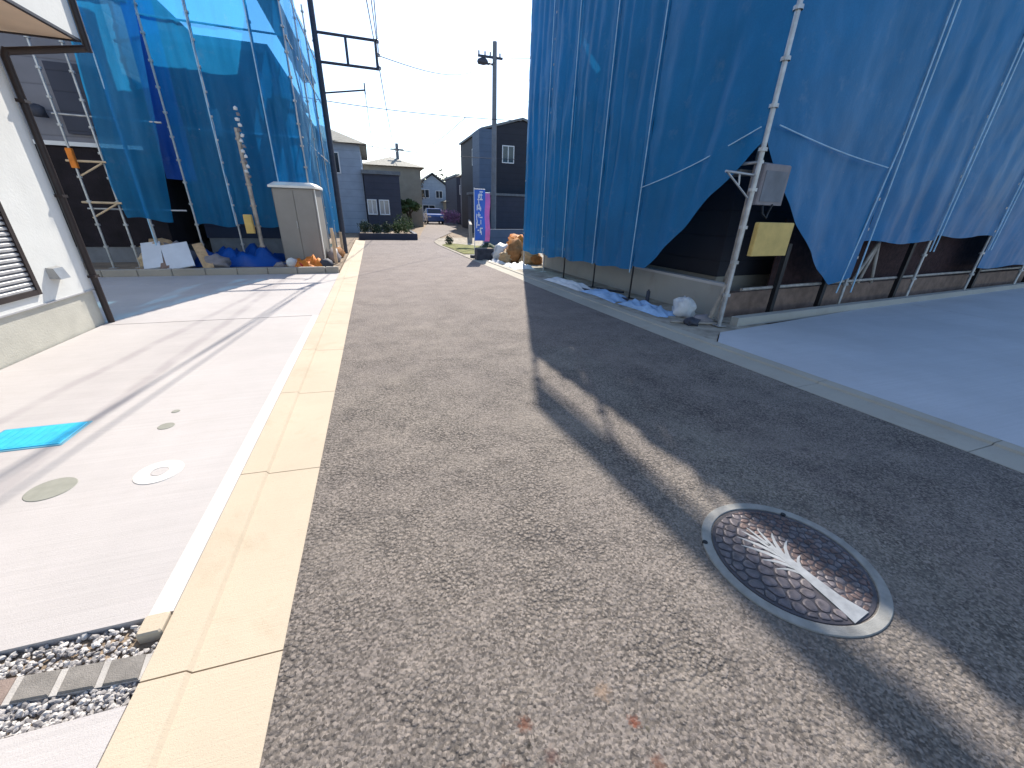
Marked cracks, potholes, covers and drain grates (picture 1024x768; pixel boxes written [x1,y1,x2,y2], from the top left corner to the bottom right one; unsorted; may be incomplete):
manhole cover [701,503,894,638]
